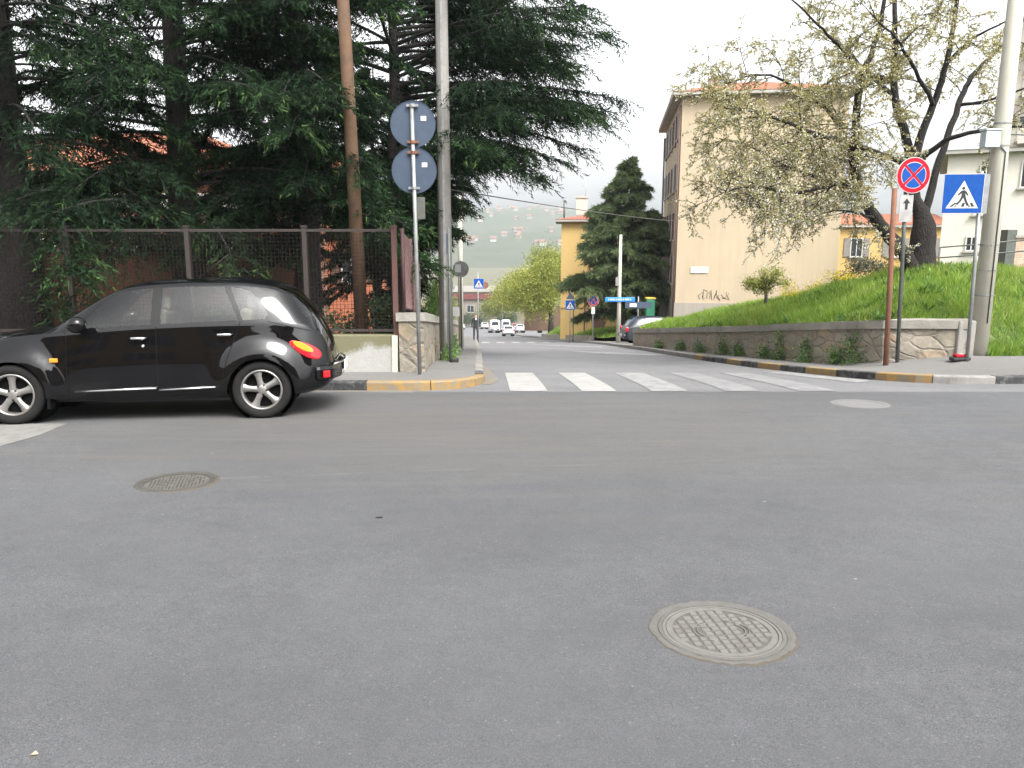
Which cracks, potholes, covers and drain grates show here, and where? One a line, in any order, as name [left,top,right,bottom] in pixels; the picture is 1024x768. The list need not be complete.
manhole cover [133,471,221,493]
manhole cover [648,600,799,666]
manhole cover [830,399,891,408]
